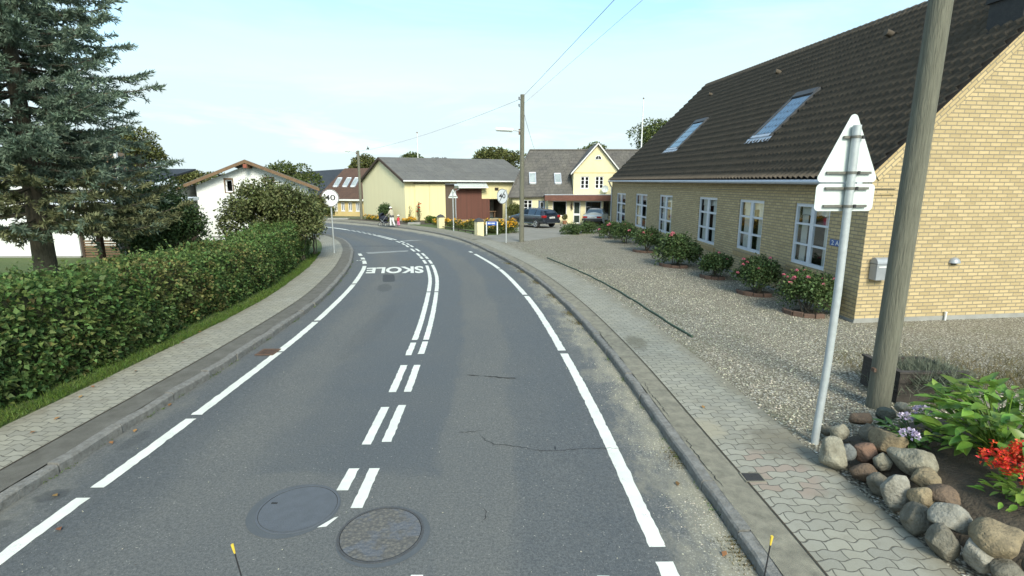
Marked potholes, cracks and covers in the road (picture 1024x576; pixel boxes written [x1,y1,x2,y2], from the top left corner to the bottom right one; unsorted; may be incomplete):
manhole cover [245,484,341,539]
manhole cover [336,506,430,568]
crack [468,430,615,451]
